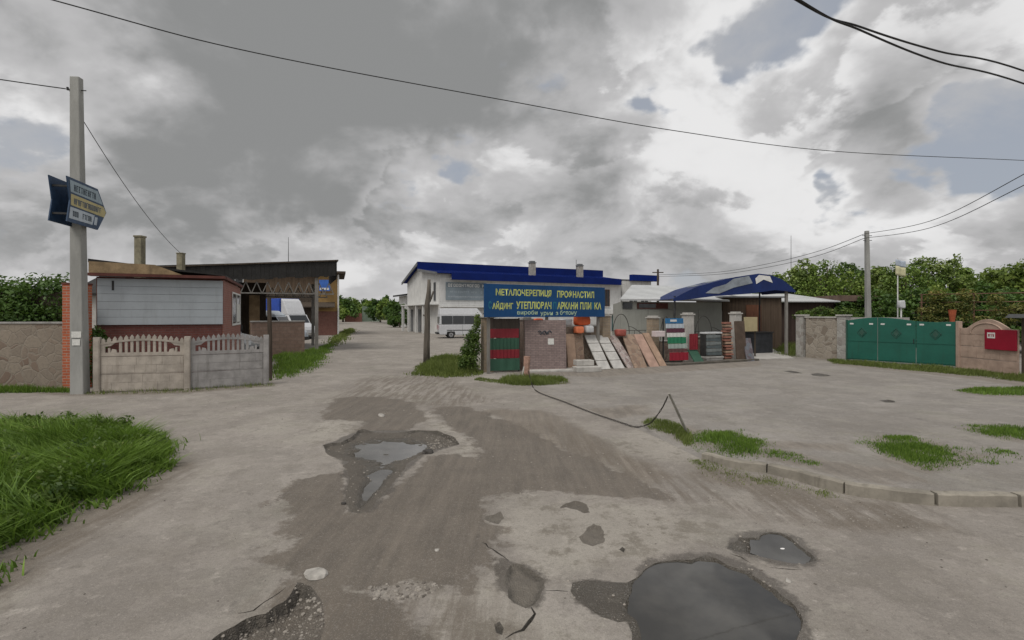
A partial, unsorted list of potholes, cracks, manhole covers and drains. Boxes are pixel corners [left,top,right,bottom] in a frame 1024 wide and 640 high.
crack [481,542,568,639]
pothole [323,429,459,514]
pothole [484,512,504,524]
pothole [212,582,325,640]
pothole [579,524,605,546]
pothole [727,532,817,564]
pothole [571,555,803,640]
pothole [560,501,590,513]
